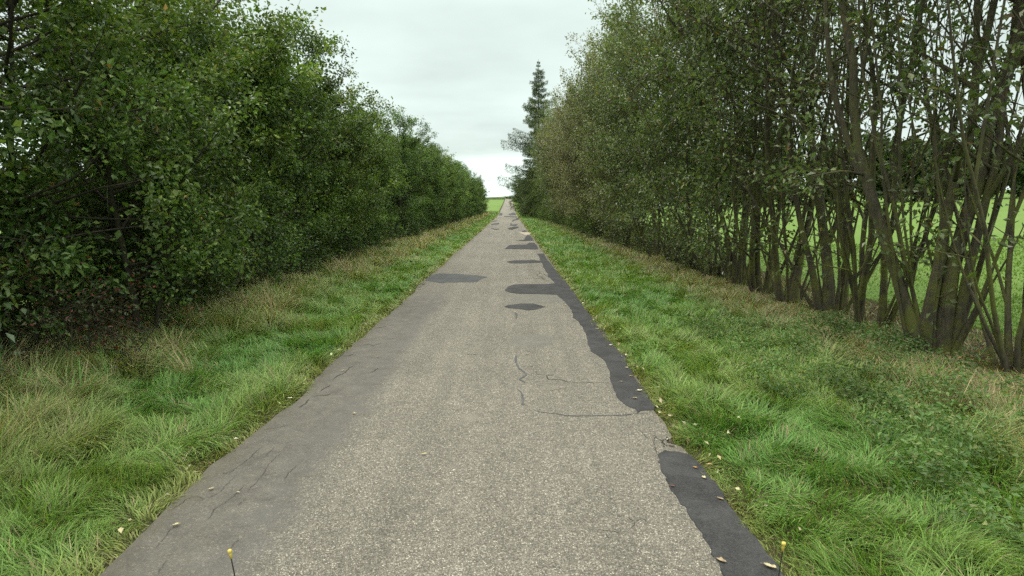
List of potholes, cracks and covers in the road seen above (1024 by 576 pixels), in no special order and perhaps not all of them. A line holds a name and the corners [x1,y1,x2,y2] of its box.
crack [142,427,298,573]
